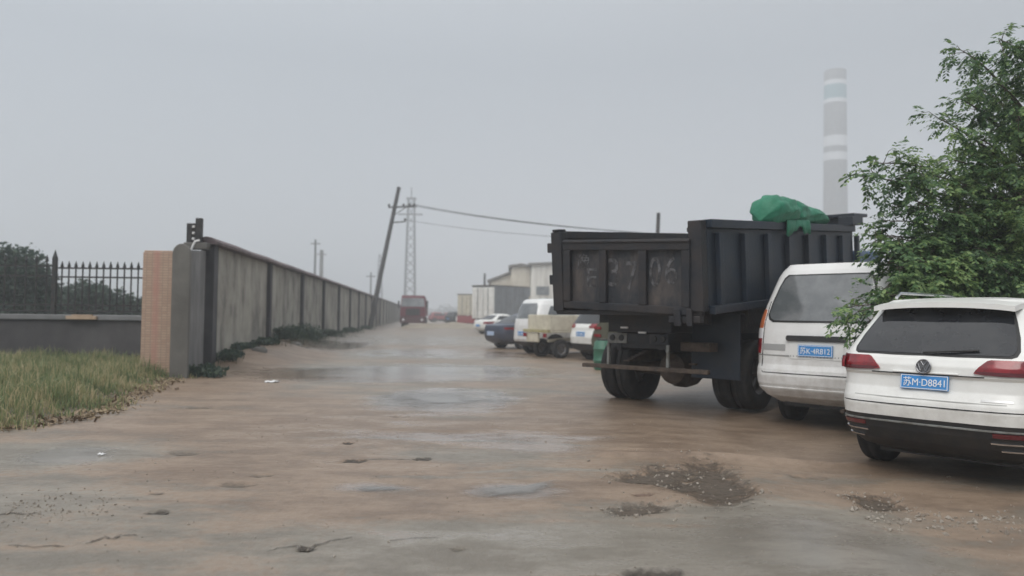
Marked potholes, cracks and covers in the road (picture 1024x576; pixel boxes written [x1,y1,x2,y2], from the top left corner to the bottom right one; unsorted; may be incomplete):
pothole [848,495,904,512]
pothole [660,456,756,506]
pothole [620,464,697,489]
pothole [610,504,671,516]
crack [269,537,350,551]
